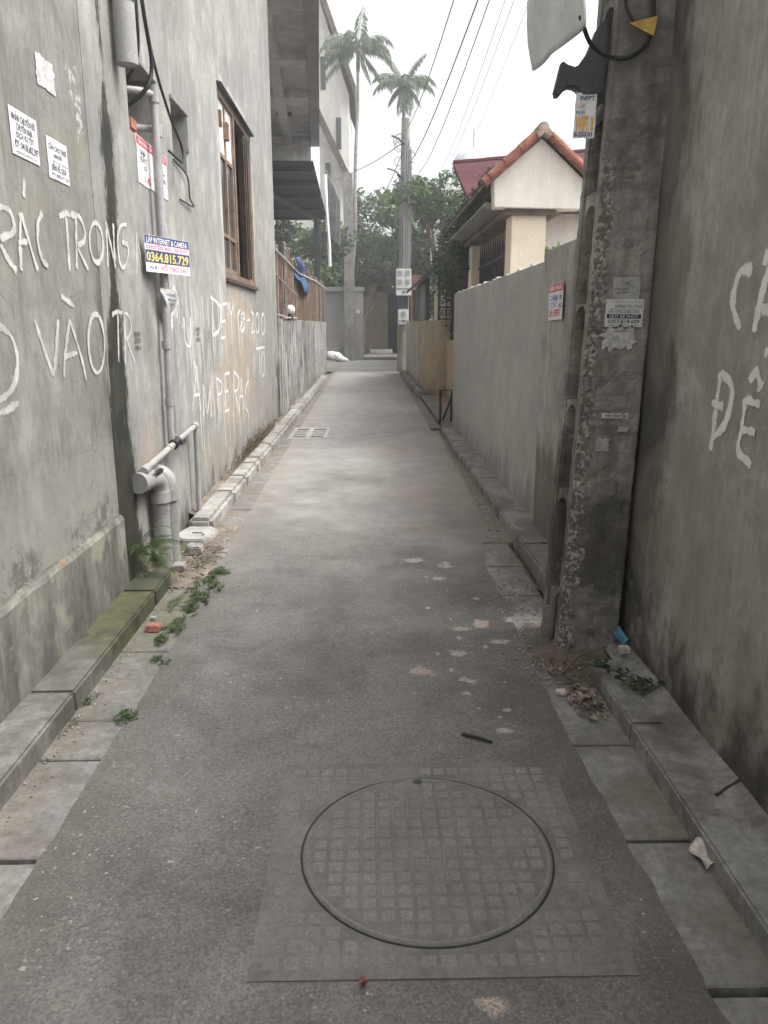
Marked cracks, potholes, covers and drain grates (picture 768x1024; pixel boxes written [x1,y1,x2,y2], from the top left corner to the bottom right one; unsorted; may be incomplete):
drain grate [287,428,330,439]
utility cover [179,526,218,544]
manhole cover [247,761,640,983]
